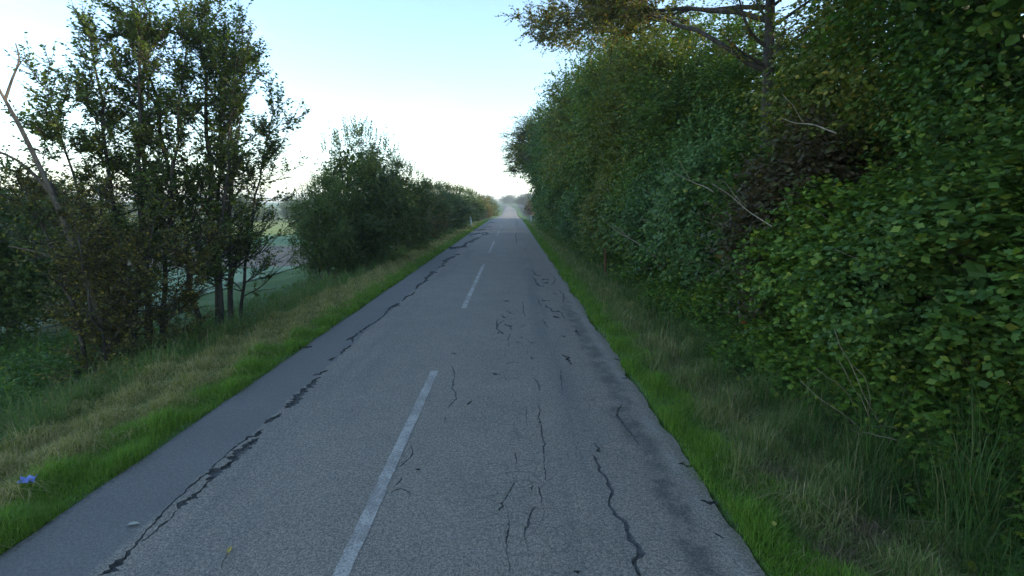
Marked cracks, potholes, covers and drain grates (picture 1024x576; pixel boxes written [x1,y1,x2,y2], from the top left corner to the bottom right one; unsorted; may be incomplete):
crack [142,438,259,541]
crack [444,353,457,423]
crack [498,378,546,573]
crack [391,446,414,499]
crack [284,370,327,408]
crack [592,406,646,576]
crack [496,269,581,359]
